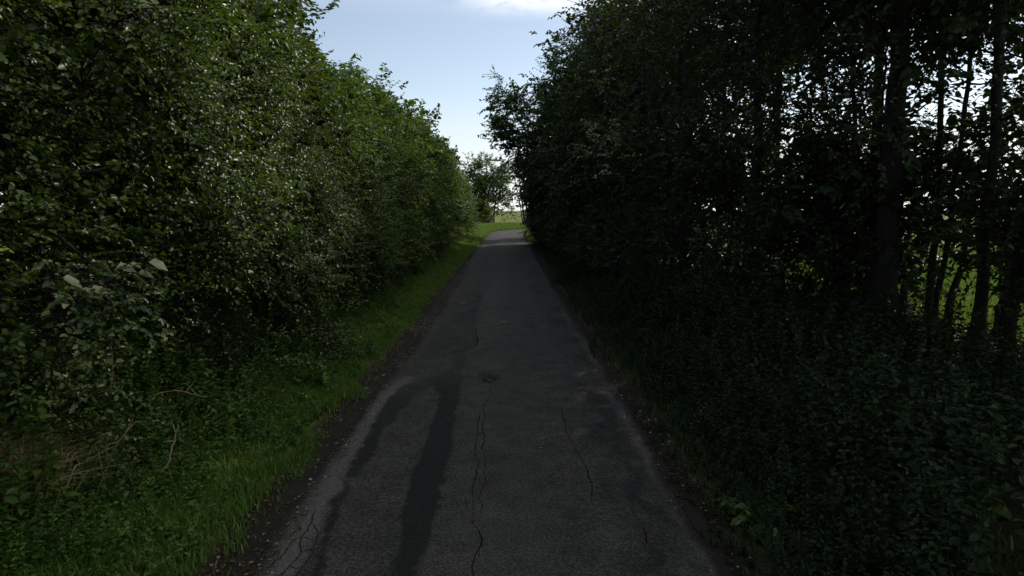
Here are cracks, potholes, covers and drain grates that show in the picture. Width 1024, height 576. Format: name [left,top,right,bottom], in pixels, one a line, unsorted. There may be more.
crack [266,509,322,576]
crack [560,406,596,510]
crack [622,511,648,547]
crack [667,489,715,556]
pothole [477,373,499,385]
crack [465,385,492,576]
crack [432,330,479,356]
